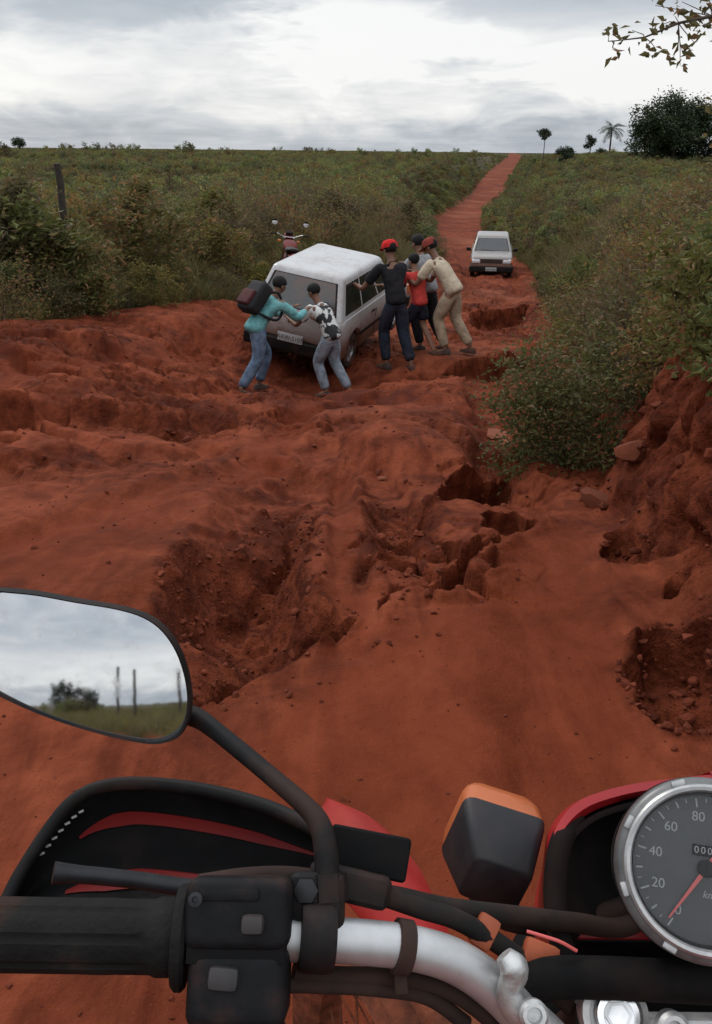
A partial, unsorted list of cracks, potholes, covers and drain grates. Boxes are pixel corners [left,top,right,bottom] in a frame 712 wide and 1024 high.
pothole [482,509,529,539]
pothole [432,464,519,508]
pothole [442,351,540,385]
pothole [613,614,712,741]
pothole [466,304,542,334]
pothole [149,504,360,708]
pothole [349,494,448,596]
pothole [598,525,663,565]
